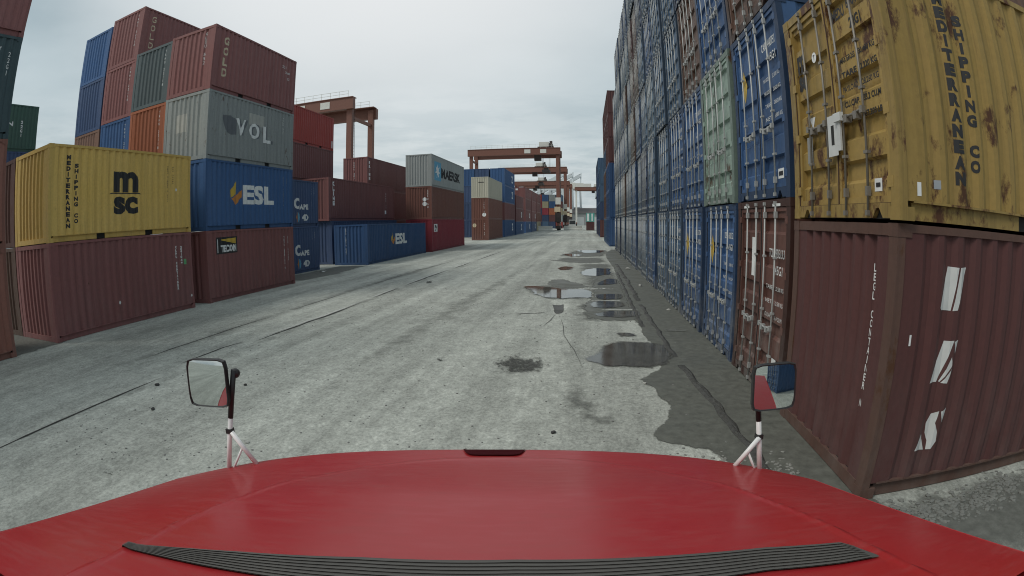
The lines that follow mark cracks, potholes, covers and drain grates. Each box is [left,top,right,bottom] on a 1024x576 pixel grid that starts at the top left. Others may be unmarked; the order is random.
crack [521,312,582,366]
